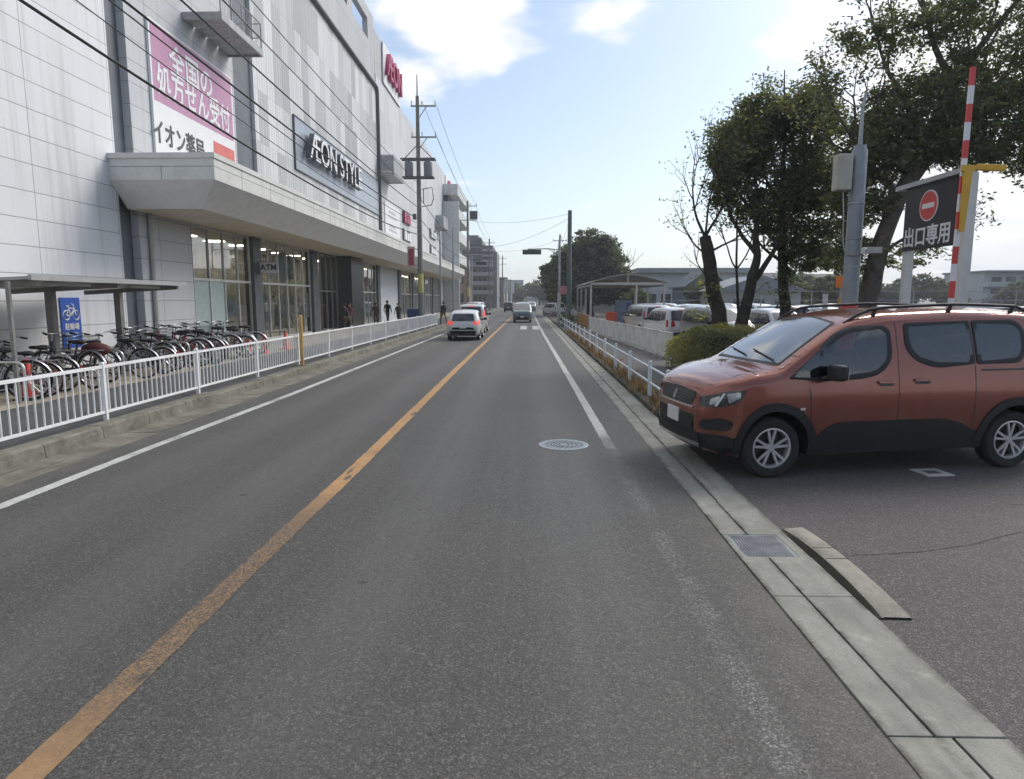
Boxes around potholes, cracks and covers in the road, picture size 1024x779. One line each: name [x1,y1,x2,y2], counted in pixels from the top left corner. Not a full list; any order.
crack [857,532,1020,555]
utility cover [909,468,955,477]
drain grate [727,535,798,559]
manhole cover [539,439,589,450]
